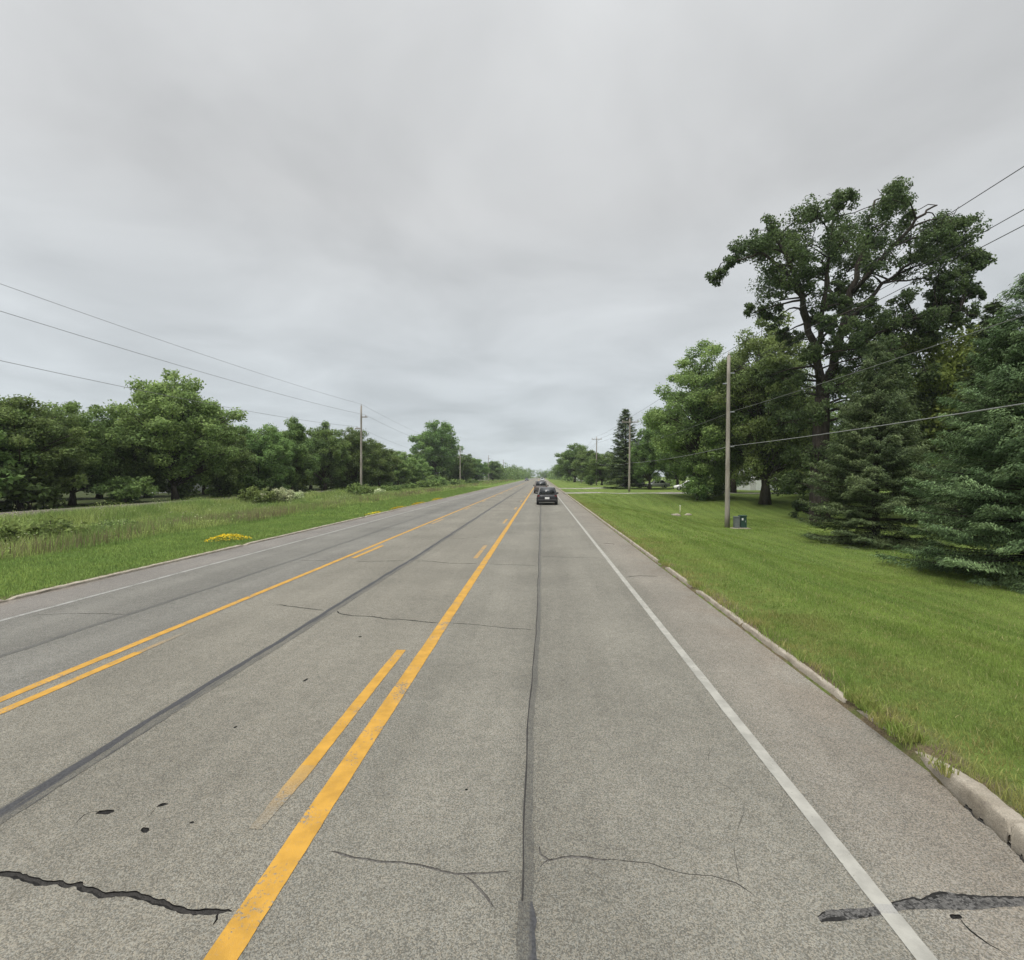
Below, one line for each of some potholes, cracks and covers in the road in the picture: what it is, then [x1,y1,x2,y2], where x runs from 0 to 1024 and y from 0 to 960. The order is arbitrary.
crack [539,747,755,896]
crack [818,891,1024,922]
crack [0,871,232,925]
crack [337,611,435,623]
crack [331,851,508,910]
